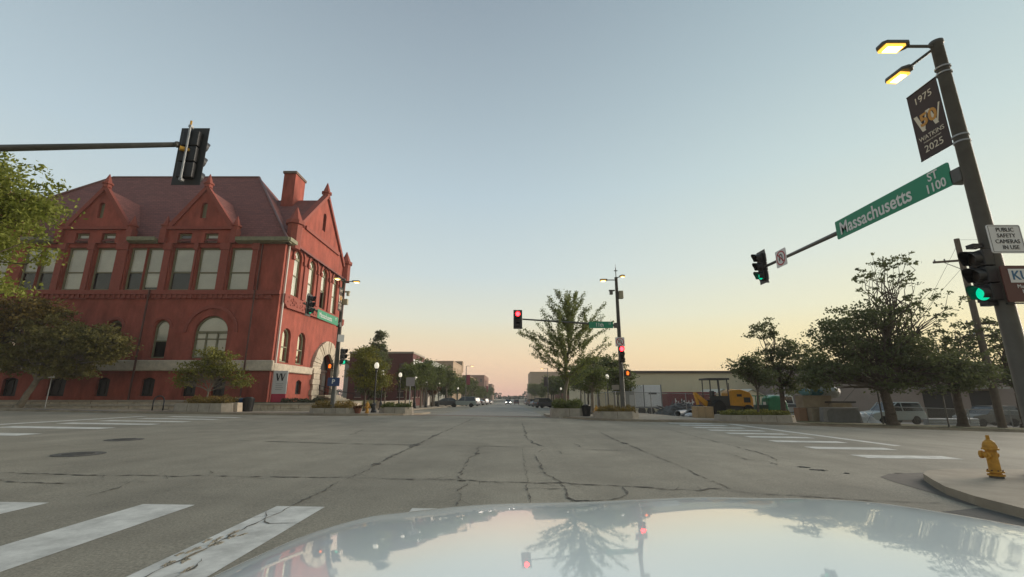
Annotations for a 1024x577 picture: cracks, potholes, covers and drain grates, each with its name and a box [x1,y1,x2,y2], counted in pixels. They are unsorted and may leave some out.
crack [1,419,937,577]
